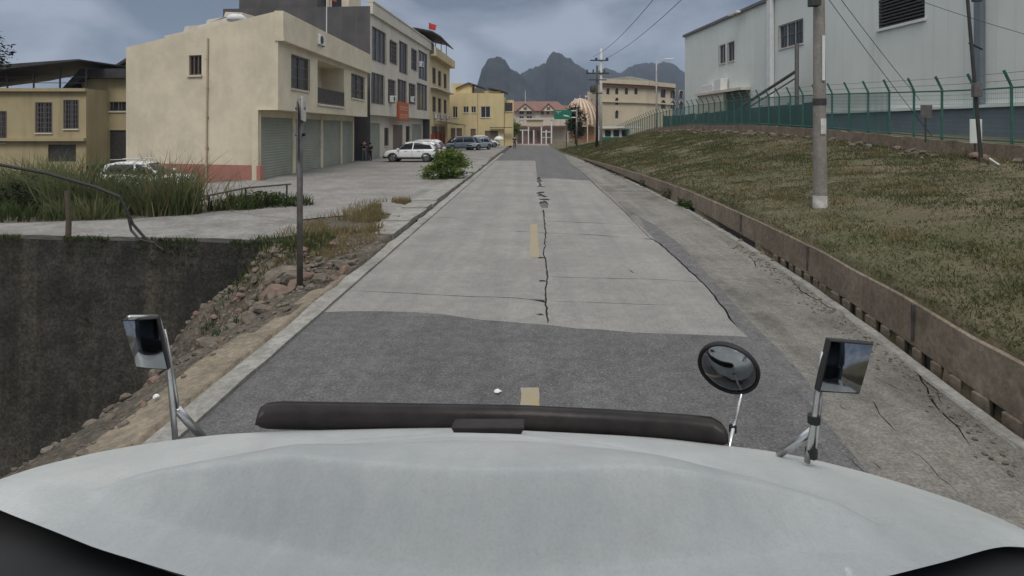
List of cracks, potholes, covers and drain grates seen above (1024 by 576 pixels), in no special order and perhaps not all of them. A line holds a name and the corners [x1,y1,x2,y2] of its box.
crack [752,259,970,445]
crack [349,177,702,323]
